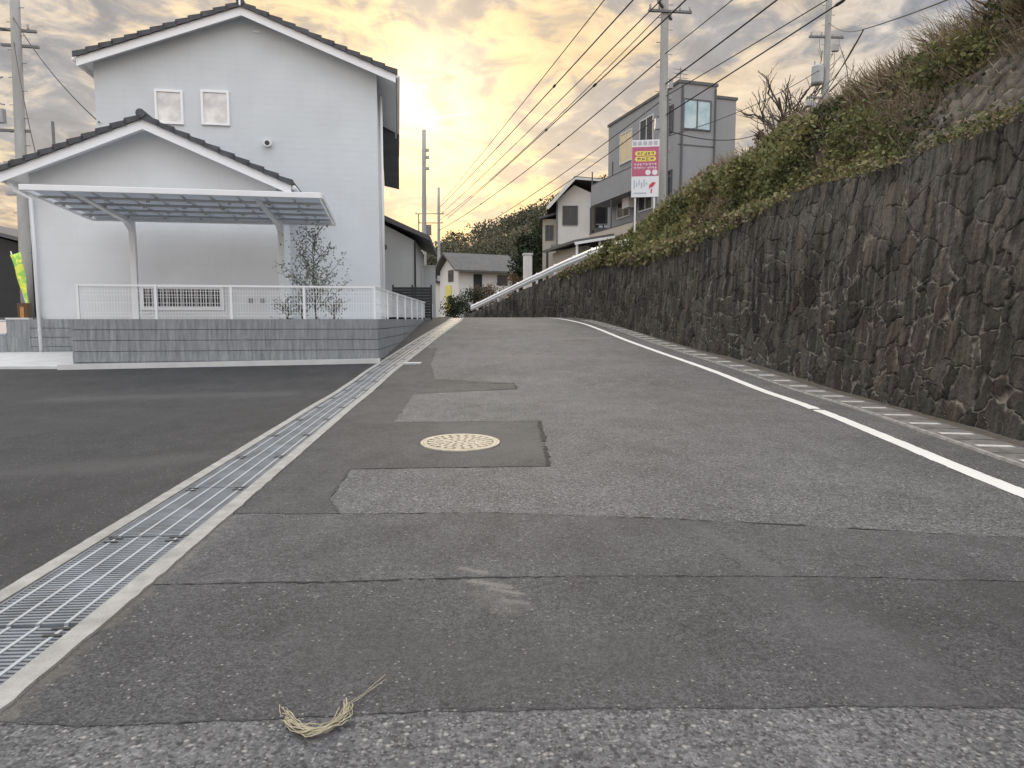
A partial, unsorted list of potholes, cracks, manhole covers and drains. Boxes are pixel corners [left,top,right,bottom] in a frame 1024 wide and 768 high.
drain grate [343,381,379,390]
manhole cover [421,434,500,452]
drain grate [0,536,187,629]
drain grate [188,455,286,488]
drain grate [367,365,398,373]
drain grate [0,626,72,685]
drain grate [272,419,331,435]
drain grate [109,487,248,538]
drain grate [357,372,388,382]
drain grate [315,398,358,408]
drain grate [237,434,313,457]
drain grate [296,407,346,420]
